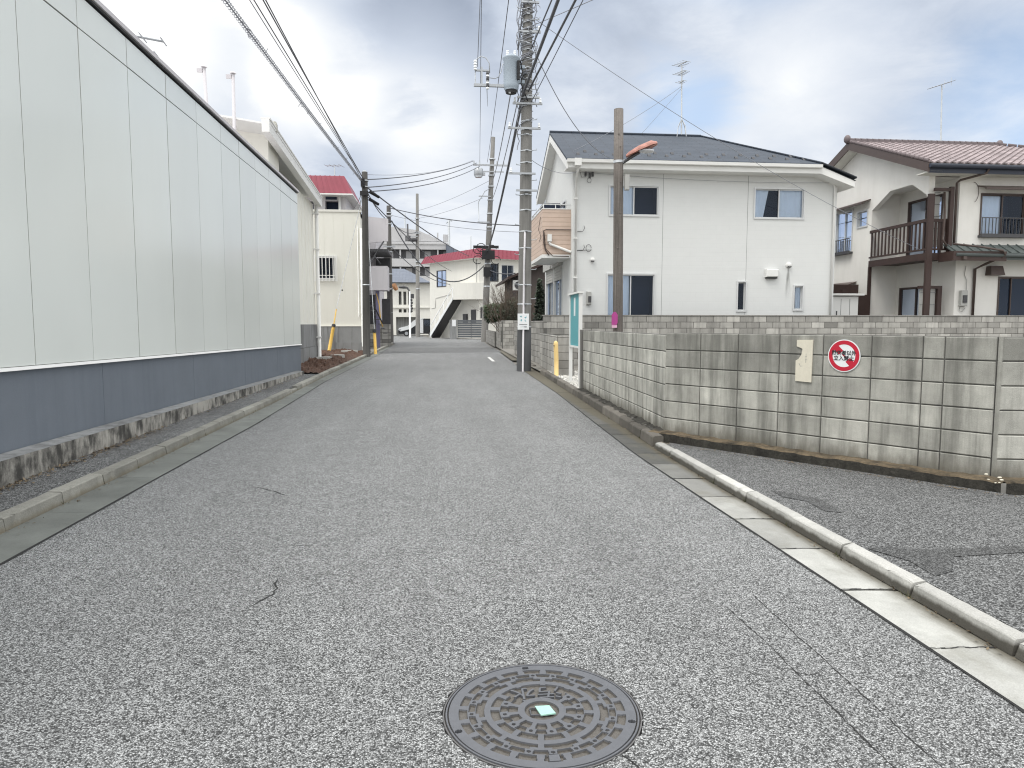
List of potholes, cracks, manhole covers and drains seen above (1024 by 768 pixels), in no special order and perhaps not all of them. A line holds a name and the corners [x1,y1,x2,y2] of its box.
manhole cover [442,664,642,768]
crack [245,578,280,609]
